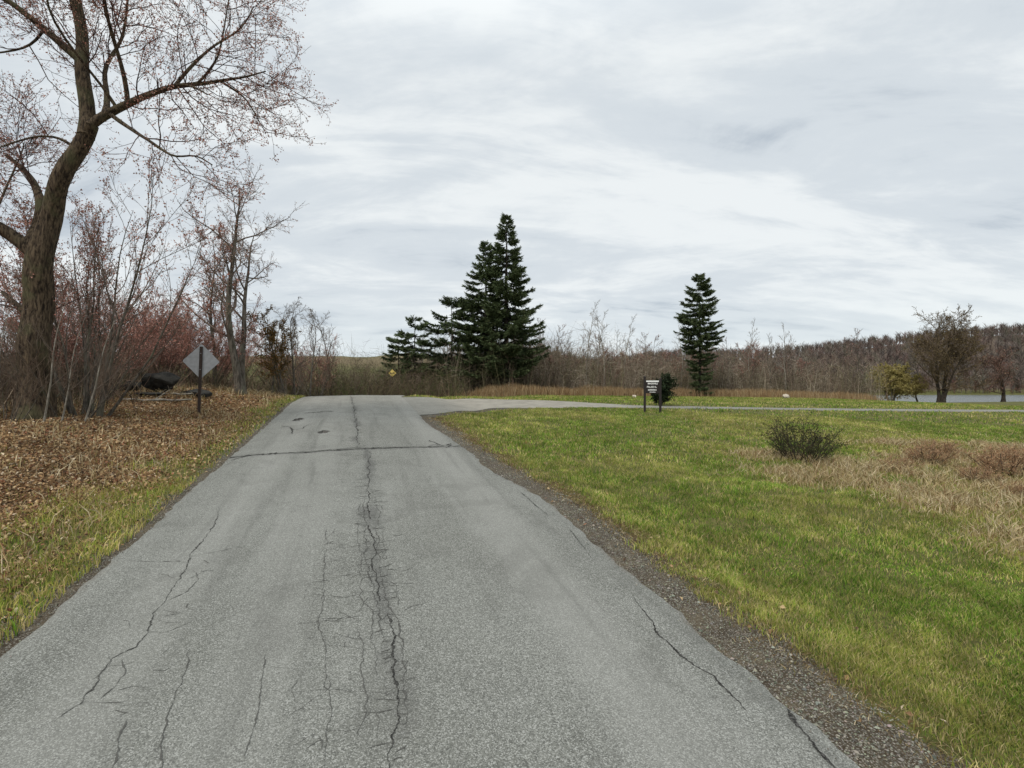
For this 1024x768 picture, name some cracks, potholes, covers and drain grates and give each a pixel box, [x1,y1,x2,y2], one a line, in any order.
crack [787,708,835,768]
crack [280,519,392,765]
crack [634,598,746,710]
crack [28,508,245,768]
